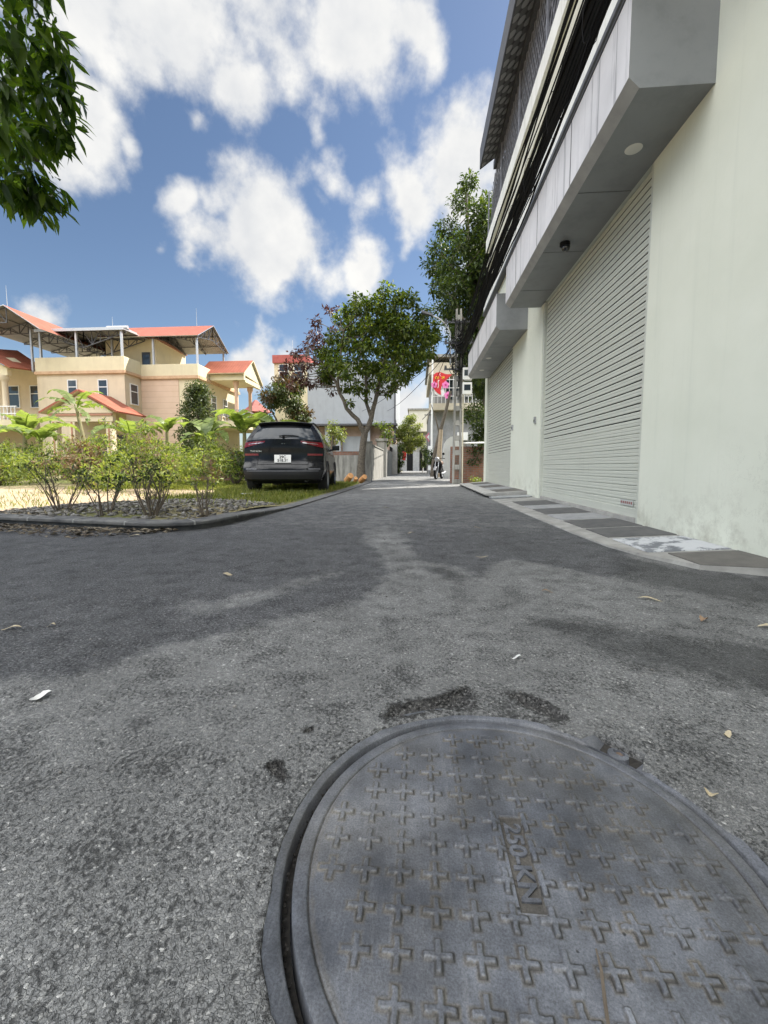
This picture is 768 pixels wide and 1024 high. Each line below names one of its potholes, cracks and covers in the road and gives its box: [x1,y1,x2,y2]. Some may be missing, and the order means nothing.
manhole cover [261,707,768,1024]
